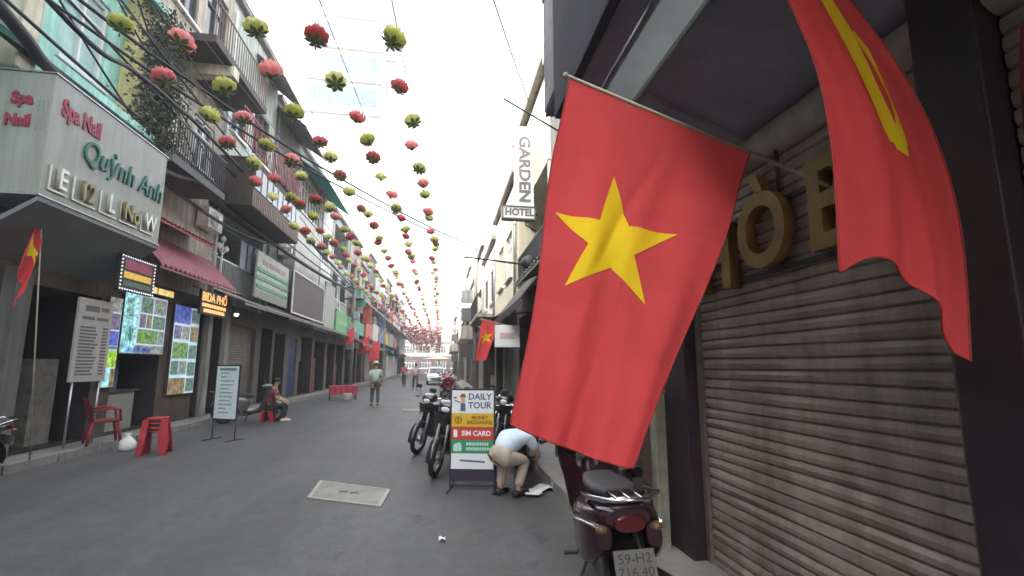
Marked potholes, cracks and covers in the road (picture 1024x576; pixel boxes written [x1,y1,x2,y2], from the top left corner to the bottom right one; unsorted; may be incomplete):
manhole cover [307,480,390,508]
